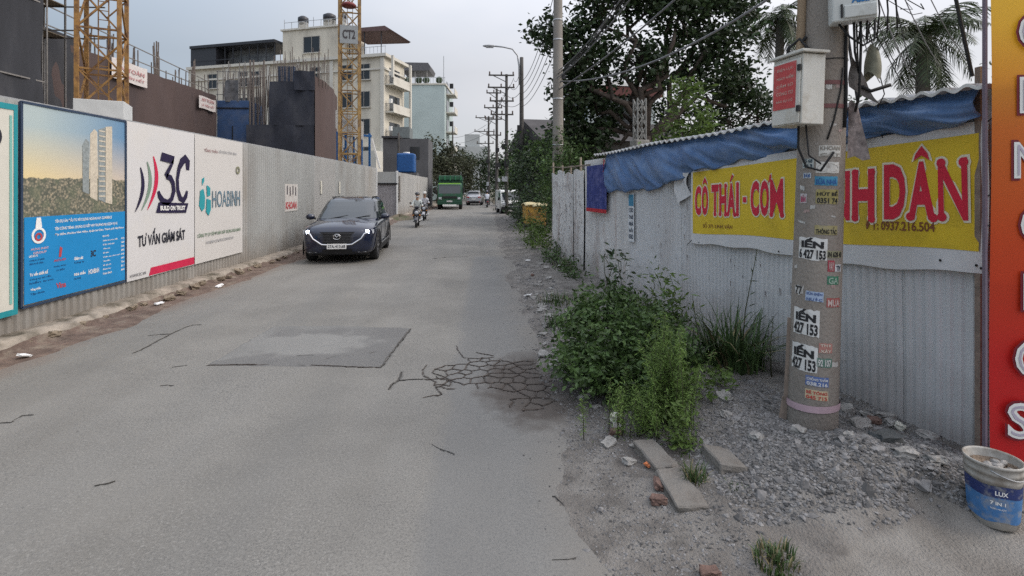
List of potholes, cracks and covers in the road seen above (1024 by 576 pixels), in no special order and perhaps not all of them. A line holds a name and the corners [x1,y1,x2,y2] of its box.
crack [133,324,202,368]
crack [206,329,561,411]
